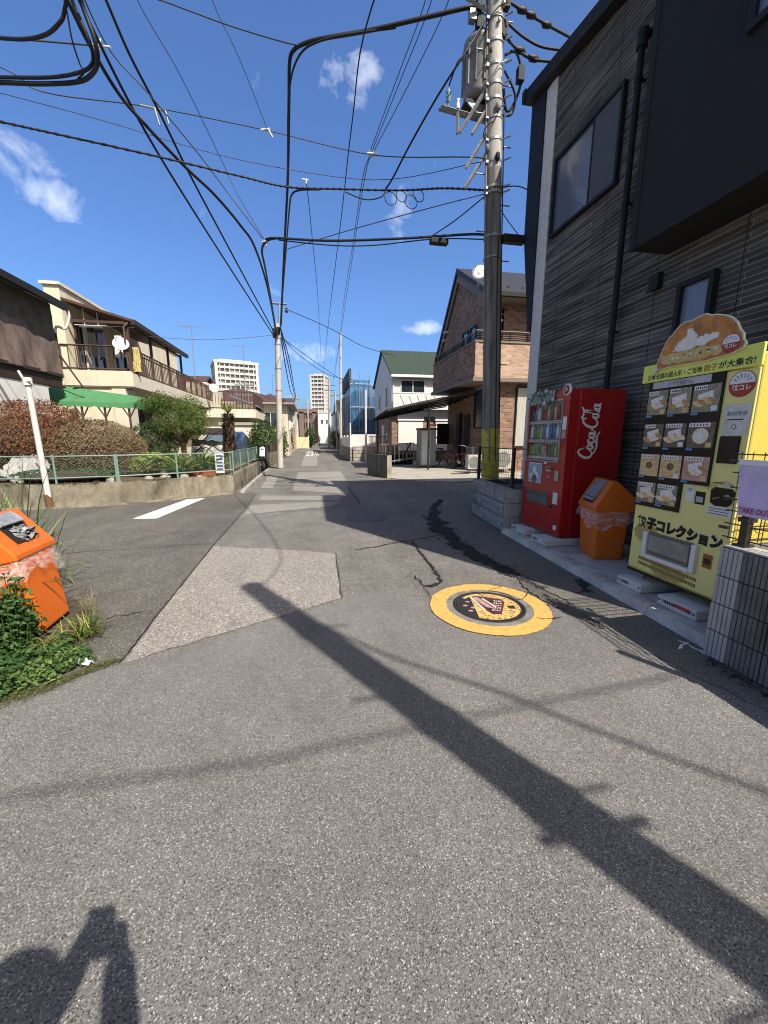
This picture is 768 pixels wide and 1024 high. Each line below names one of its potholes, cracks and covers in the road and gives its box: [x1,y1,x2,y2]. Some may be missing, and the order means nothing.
manhole cover [430,584,553,636]
manhole cover [346,513,385,522]
crack [354,534,443,596]
